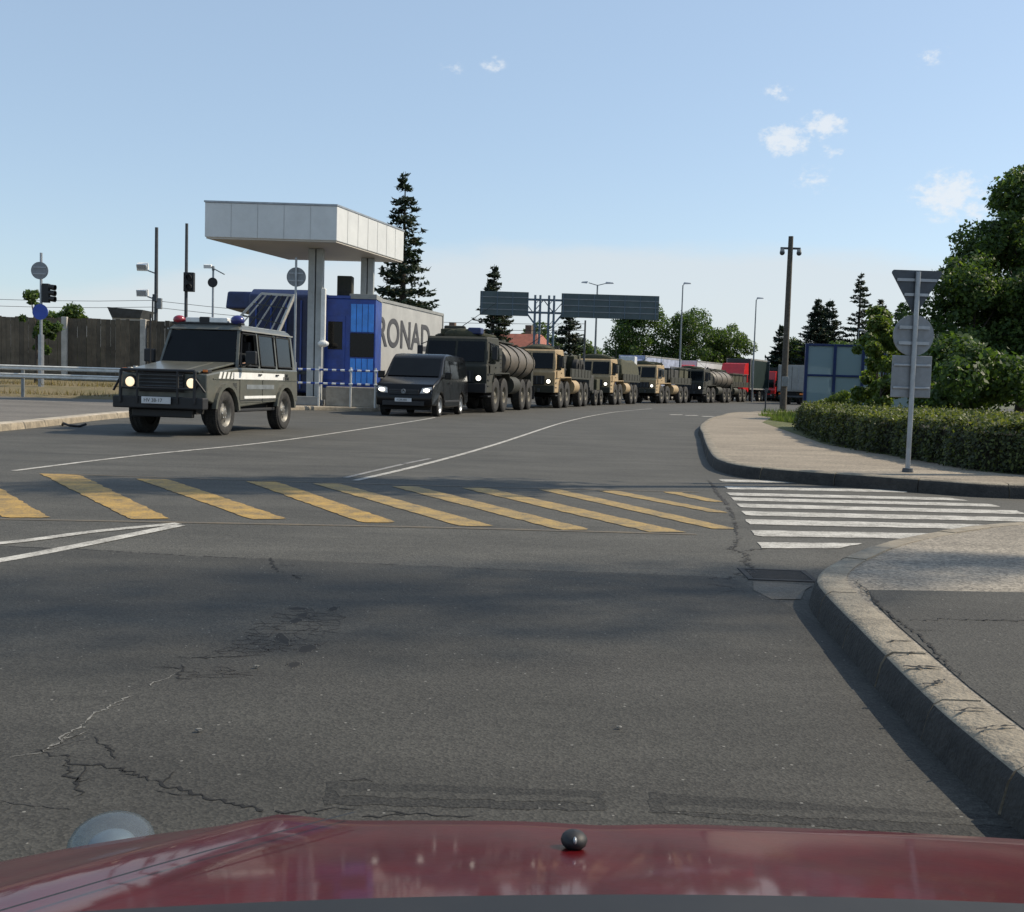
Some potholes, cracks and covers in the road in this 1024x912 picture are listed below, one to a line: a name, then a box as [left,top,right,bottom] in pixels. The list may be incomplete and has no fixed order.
crack [0,609,475,818]
crack [855,579,1024,677]
